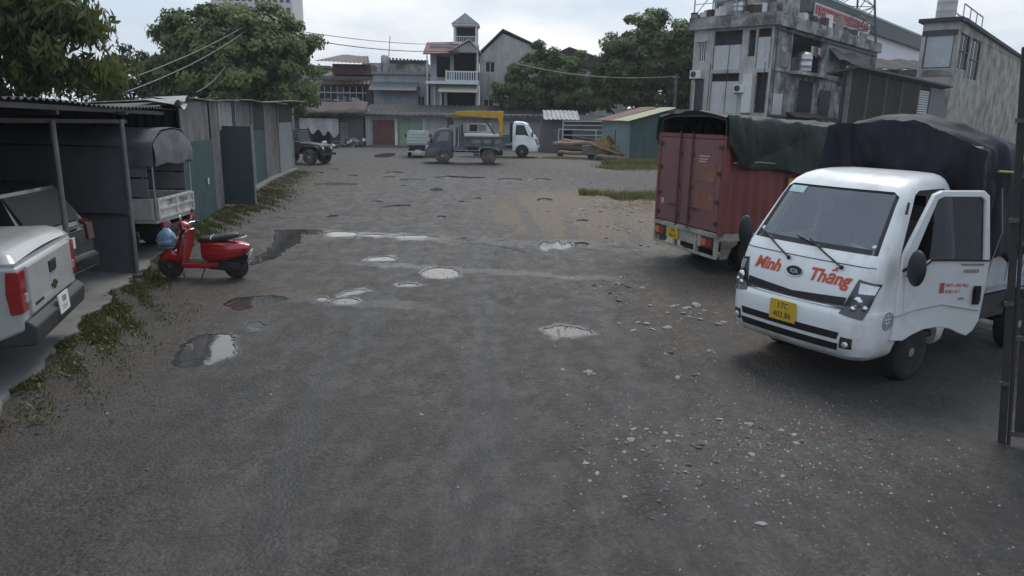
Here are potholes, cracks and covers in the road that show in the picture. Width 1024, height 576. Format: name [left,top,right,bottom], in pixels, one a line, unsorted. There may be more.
pothole [543,325,592,337]
pothole [421,267,460,279]
pothole [252,229,306,265]
pothole [537,240,573,251]
pothole [245,321,267,331]
pothole [176,333,236,367]
pothole [227,295,289,310]
